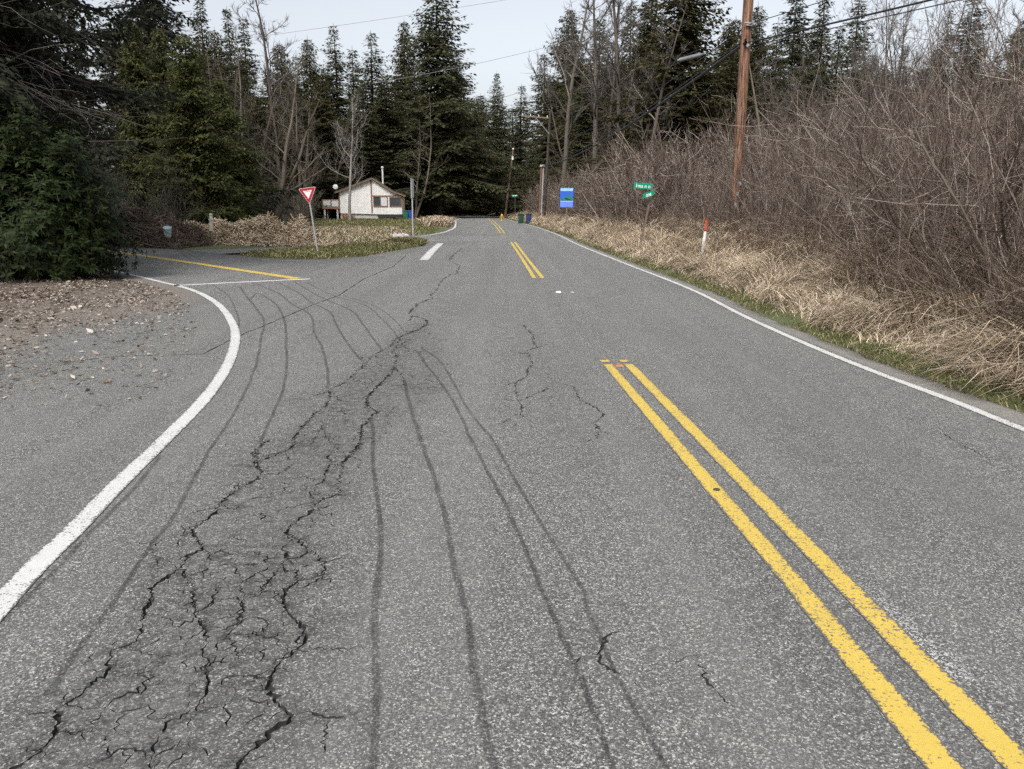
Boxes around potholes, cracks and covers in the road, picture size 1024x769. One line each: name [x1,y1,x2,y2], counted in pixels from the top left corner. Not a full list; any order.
crack [3,320,452,769]
crack [399,249,461,338]
crack [572,631,641,688]
crack [675,655,735,708]
crack [493,325,608,442]
